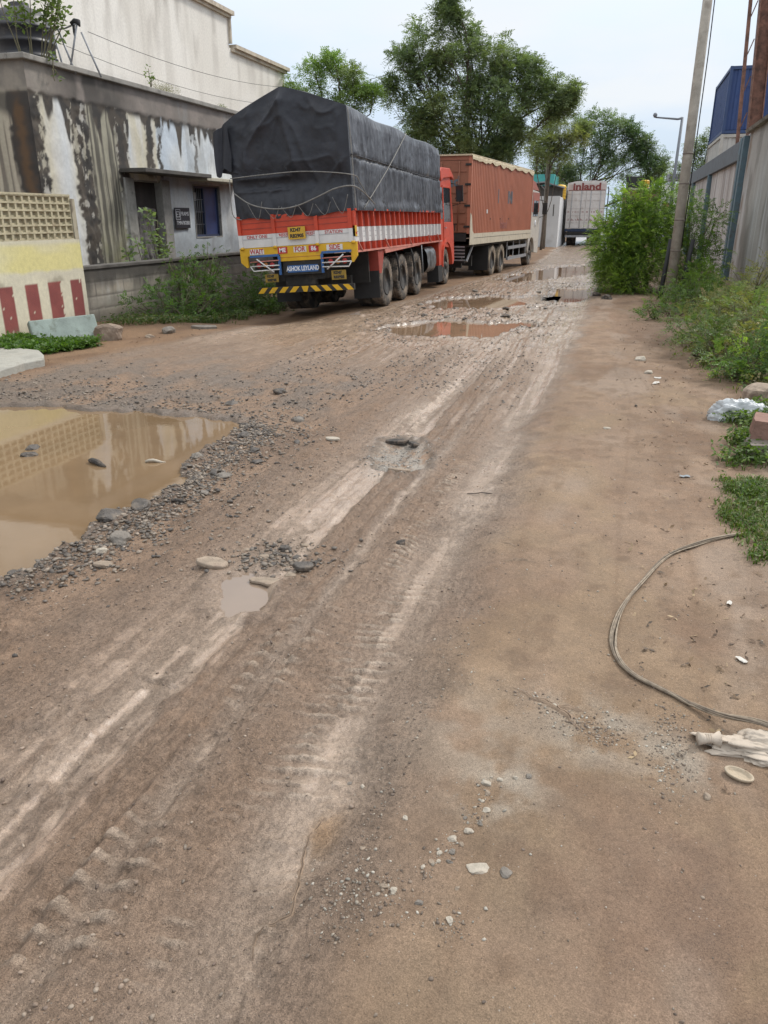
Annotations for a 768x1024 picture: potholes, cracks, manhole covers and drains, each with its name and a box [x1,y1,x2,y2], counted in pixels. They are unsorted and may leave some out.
pothole [357,435,450,478]
pothole [0,400,262,590]
pothole [421,294,561,310]
pothole [492,264,600,283]
pothole [542,286,601,303]
pothole [367,318,539,339]
crack [252,820,323,961]
